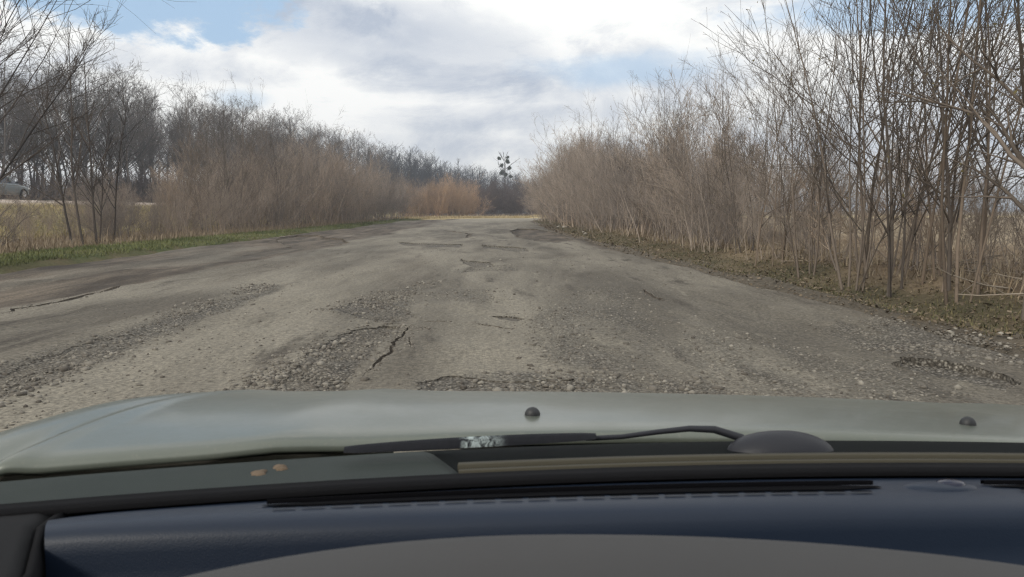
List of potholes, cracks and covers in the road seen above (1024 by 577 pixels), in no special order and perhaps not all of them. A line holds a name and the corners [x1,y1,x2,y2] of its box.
crack [363,321,450,376]
pothole [460,258,494,267]
pothole [332,299,415,322]
pothole [274,326,398,391]
pothole [0,334,144,398]
pothole [891,356,1021,391]
crack [3,285,123,313]
pothole [418,376,589,392]
pothole [509,229,573,242]
